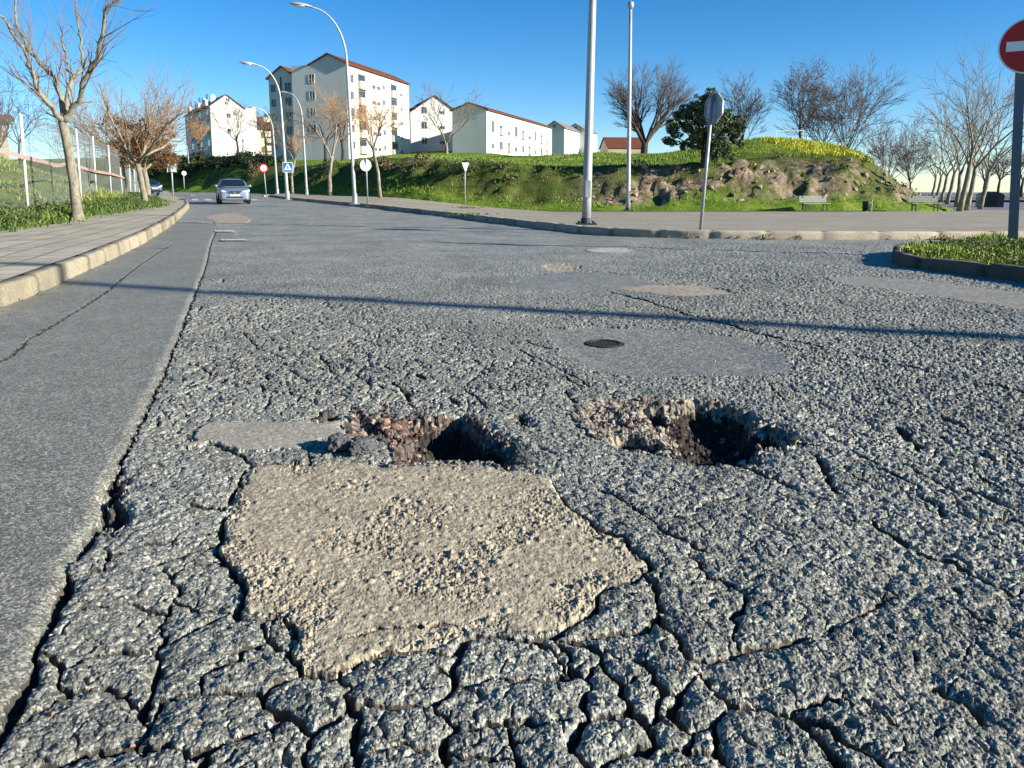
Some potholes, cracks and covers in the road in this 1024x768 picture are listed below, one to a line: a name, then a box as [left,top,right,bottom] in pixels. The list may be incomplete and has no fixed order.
manhole cover [586,339,623,348]
crack [187,314,288,402]
pothole [572,398,799,468]
pothole [343,403,524,472]
crack [742,401,1024,631]
crack [289,347,426,404]
crack [16,443,899,768]
crack [769,382,788,420]
crack [449,356,502,409]
crack [520,340,590,404]
crack [928,686,985,727]
